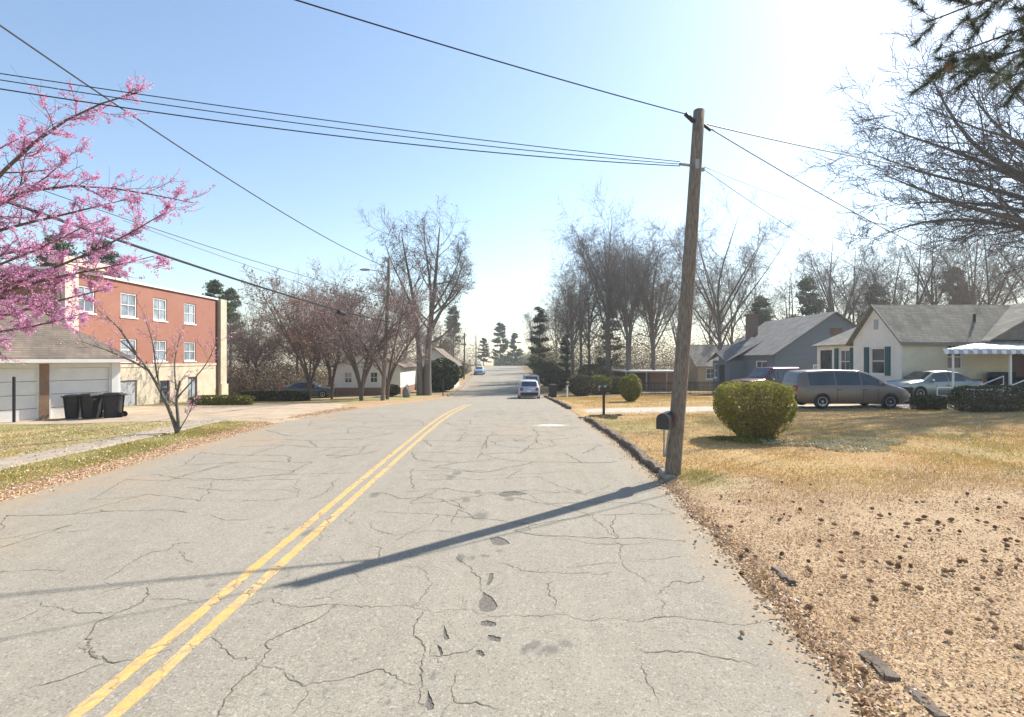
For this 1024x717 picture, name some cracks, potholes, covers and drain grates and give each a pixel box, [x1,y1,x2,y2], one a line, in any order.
crack [1,414,424,573]
pothole [413,682,447,717]
crack [197,407,778,717]
pothole [470,588,506,617]
pothole [465,643,497,663]
crack [4,584,196,687]
pothole [429,639,453,663]
pothole [470,616,506,632]
pothole [433,621,457,645]
pothole [479,570,502,590]
pothole [477,630,513,647]
